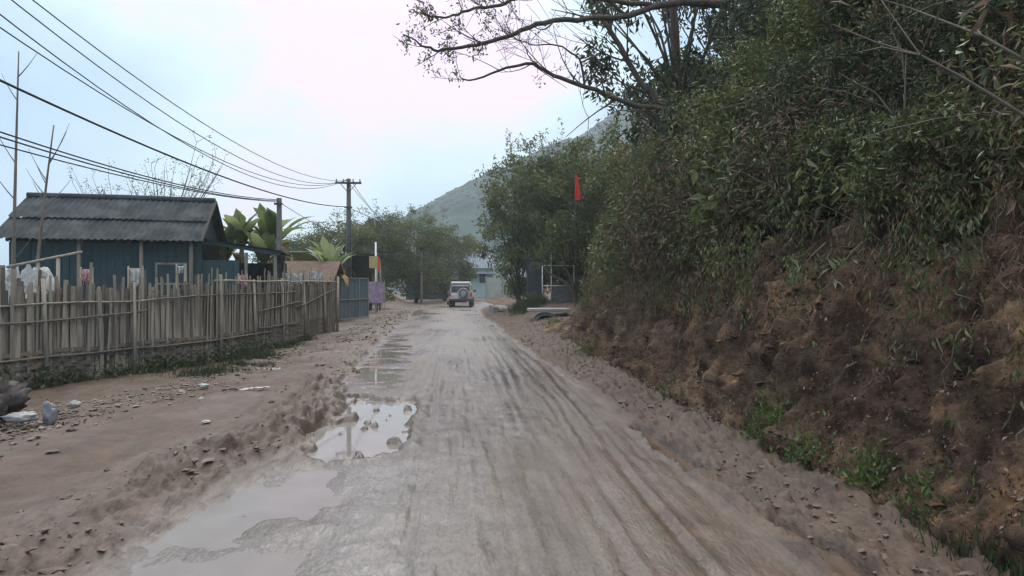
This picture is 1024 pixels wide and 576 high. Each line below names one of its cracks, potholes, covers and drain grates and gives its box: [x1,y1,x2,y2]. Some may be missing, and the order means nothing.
pothole [286,386,445,470]
